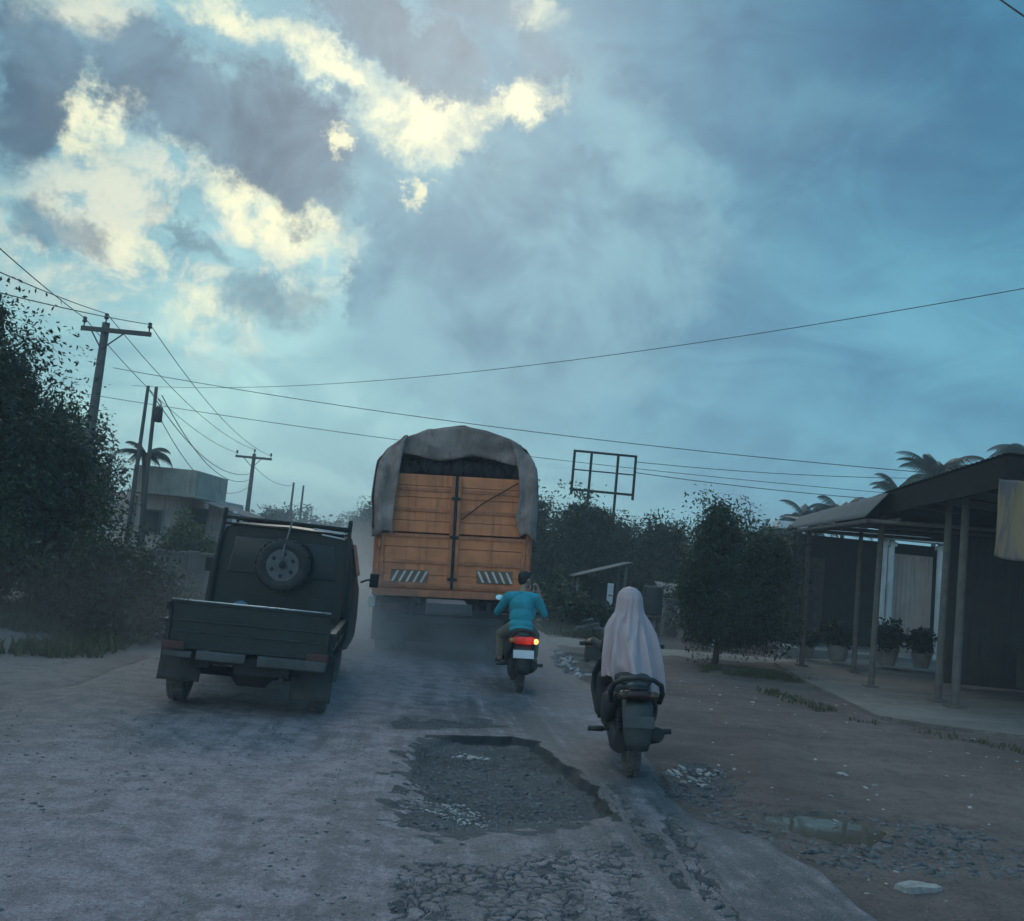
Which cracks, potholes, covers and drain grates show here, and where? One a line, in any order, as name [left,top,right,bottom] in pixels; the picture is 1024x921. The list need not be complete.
pothole [372,714,518,732]
crack [372,783,749,921]
pothole [745,806,917,852]
pothole [641,758,764,812]
pothole [351,734,630,855]
